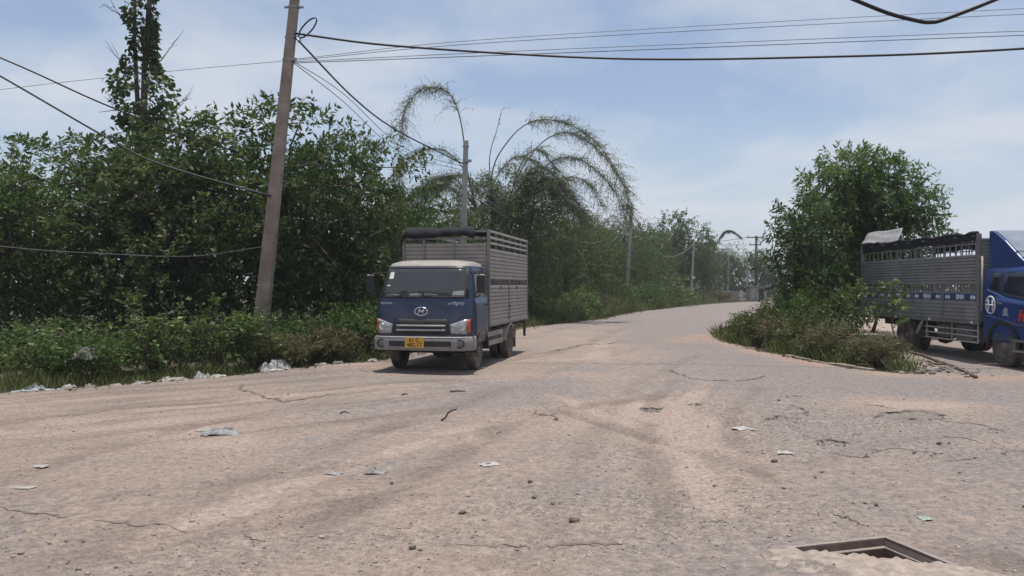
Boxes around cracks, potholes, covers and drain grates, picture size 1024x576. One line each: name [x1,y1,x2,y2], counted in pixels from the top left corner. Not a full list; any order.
manhole cover [762,536,1006,576]
crack [653,369,765,381]
crack [237,384,337,403]
crack [829,421,1002,461]
